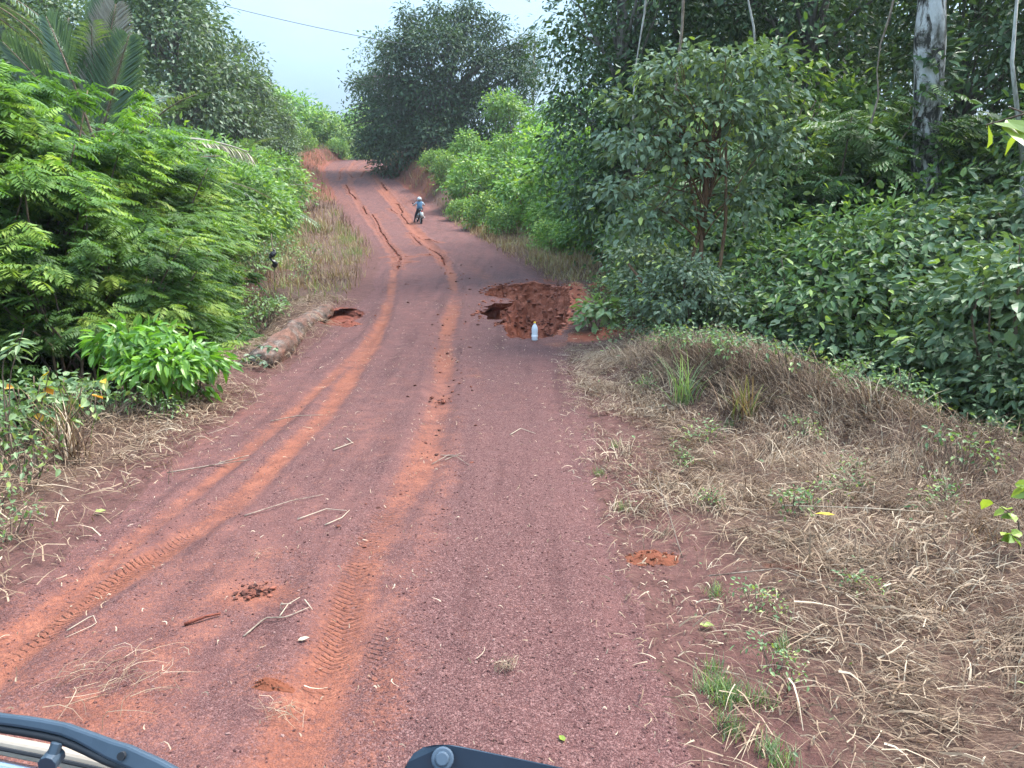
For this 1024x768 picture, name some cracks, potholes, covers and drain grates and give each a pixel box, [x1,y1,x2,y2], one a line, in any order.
pothole [477,281,575,340]
pothole [318,307,369,326]
crack [337,168,451,271]
